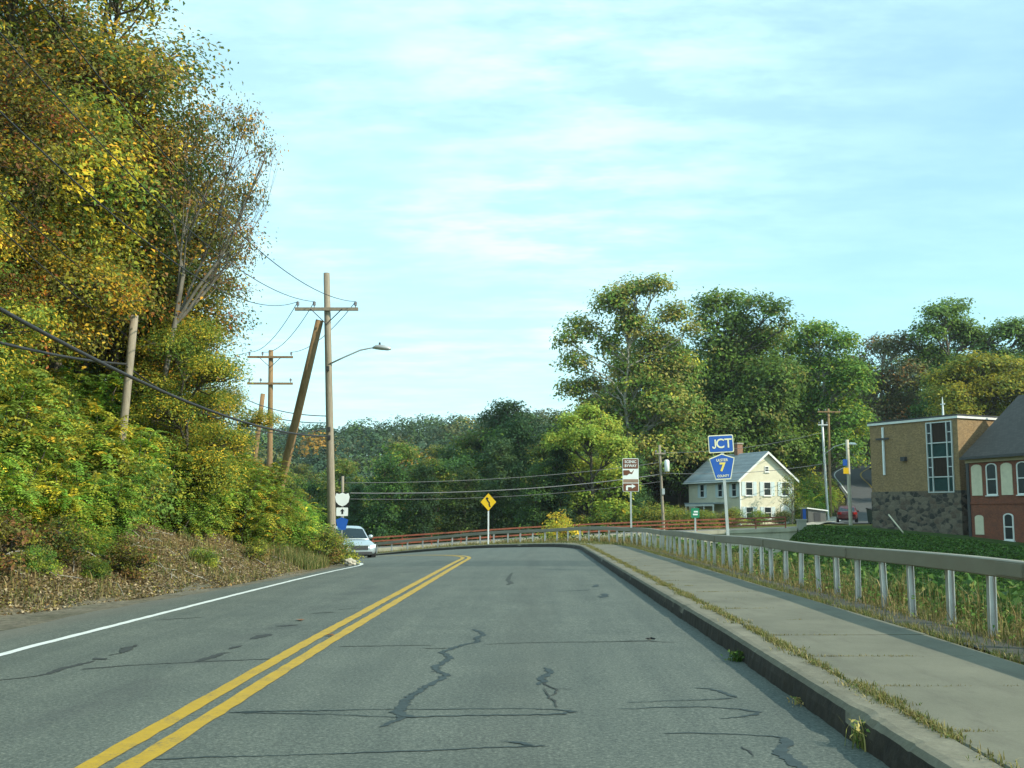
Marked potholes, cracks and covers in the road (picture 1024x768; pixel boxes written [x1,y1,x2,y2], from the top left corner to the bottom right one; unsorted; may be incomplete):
crack [622,687,808,768]
crack [1,625,291,680]
